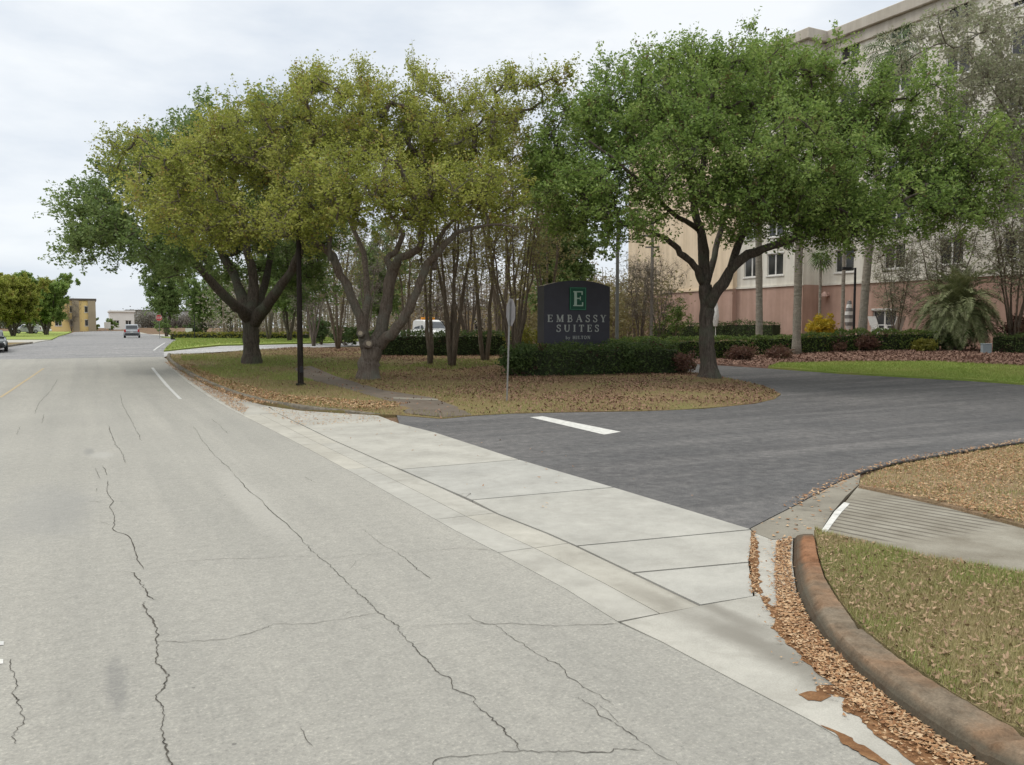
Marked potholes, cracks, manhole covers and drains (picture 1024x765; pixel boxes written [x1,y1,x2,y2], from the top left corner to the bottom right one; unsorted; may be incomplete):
crack [159,612,680,765]
crack [9,659,25,744]
crack [95,399,492,765]
